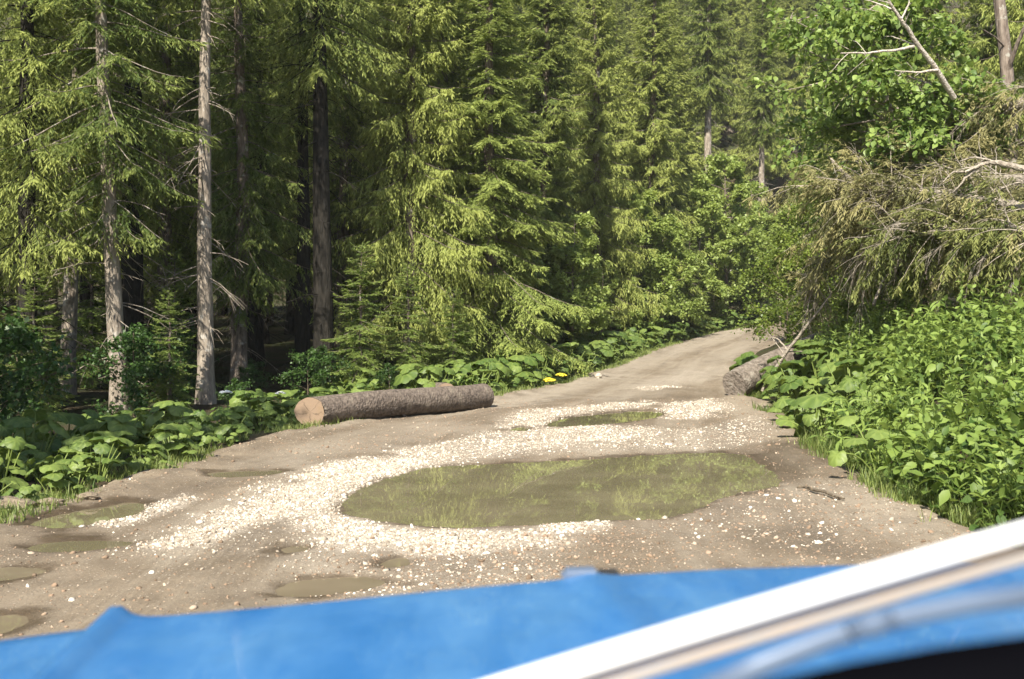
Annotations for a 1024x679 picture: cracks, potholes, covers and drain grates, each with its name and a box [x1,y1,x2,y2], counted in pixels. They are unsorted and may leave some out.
pothole [0,608,48,637]
pothole [193,468,291,478]
pothole [10,496,157,530]
pothole [324,450,798,529]
pothole [0,562,62,582]
pothole [257,572,399,599]
pothole [541,409,669,427]
pothole [9,537,145,553]
